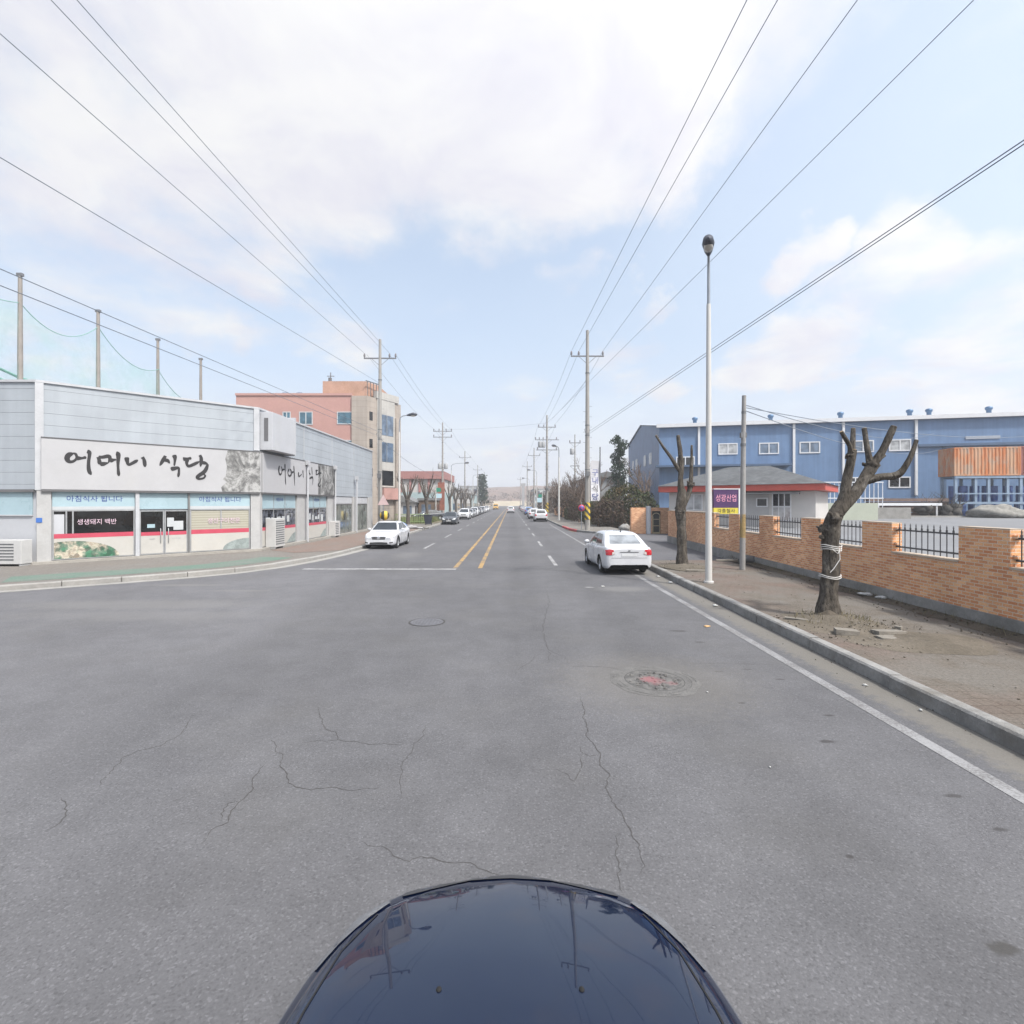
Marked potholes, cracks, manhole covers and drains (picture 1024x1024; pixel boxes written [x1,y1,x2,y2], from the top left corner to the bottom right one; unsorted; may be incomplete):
crack [559,698,645,893]
crack [271,740,376,790]
crack [362,841,498,875]
crack [306,709,431,795]
manhole cover [610,666,702,697]
crack [202,770,260,843]
manhole cover [408,618,445,626]
